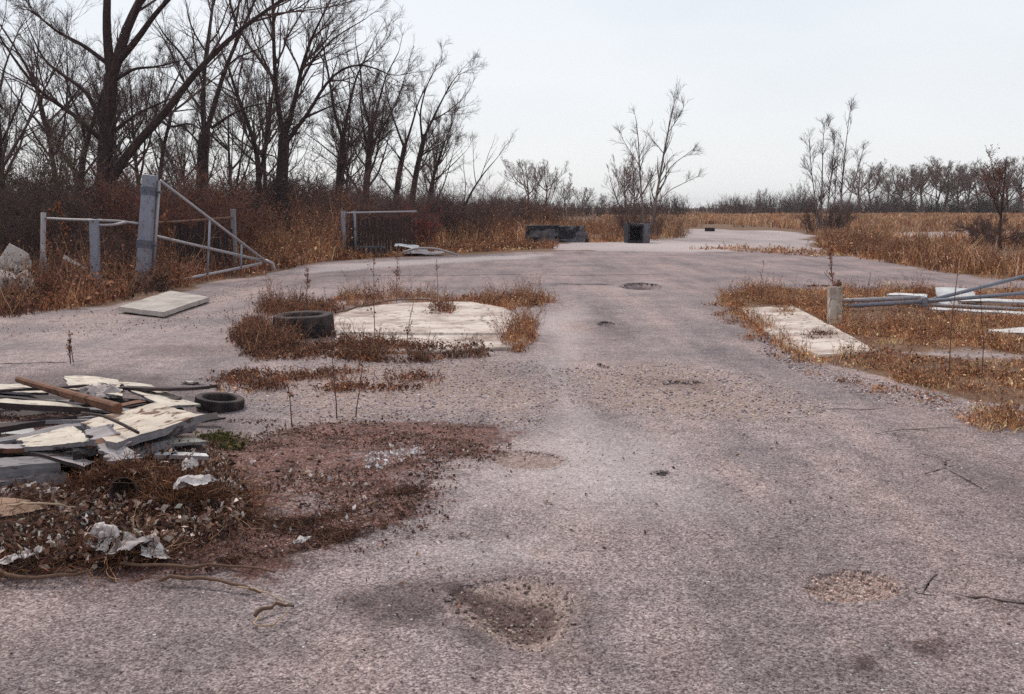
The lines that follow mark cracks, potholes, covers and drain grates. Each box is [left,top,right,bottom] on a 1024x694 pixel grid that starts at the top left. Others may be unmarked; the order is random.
pothole [433,573,592,658]
crack [821,407,992,493]
crack [915,572,1024,608]
pothole [648,469,679,478]
pothole [790,566,919,607]
pothole [590,320,624,328]
pothole [651,378,717,387]
